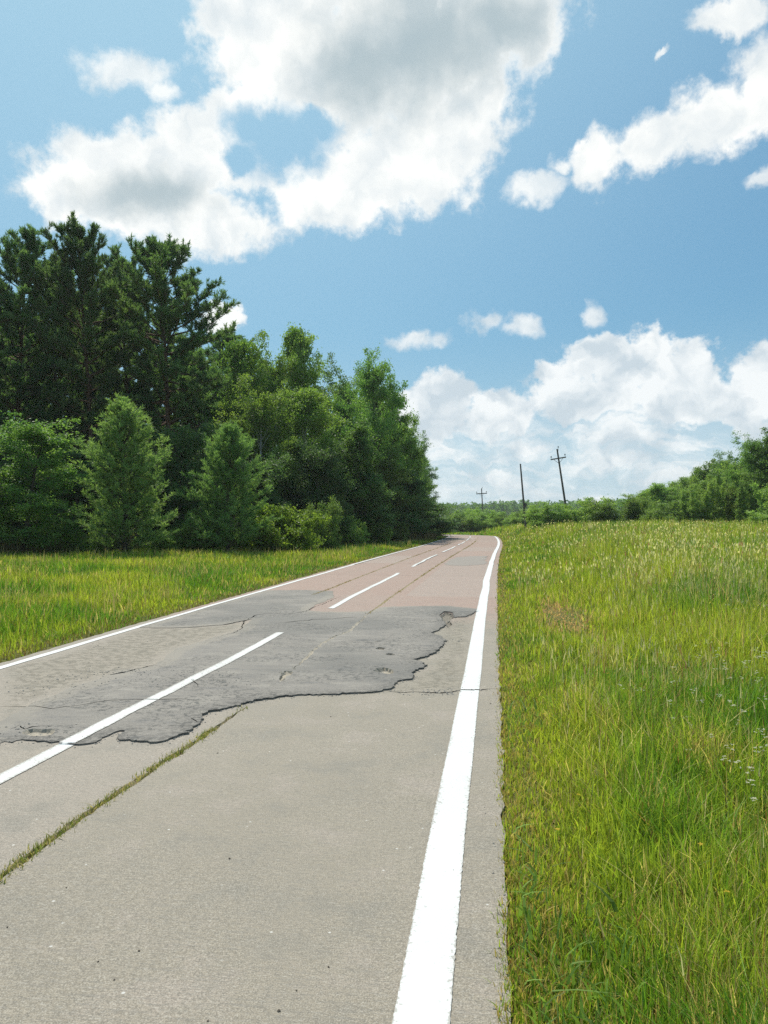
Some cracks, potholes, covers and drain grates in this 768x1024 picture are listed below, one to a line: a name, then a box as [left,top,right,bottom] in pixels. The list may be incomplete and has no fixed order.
pothole [441,612,454,628]
